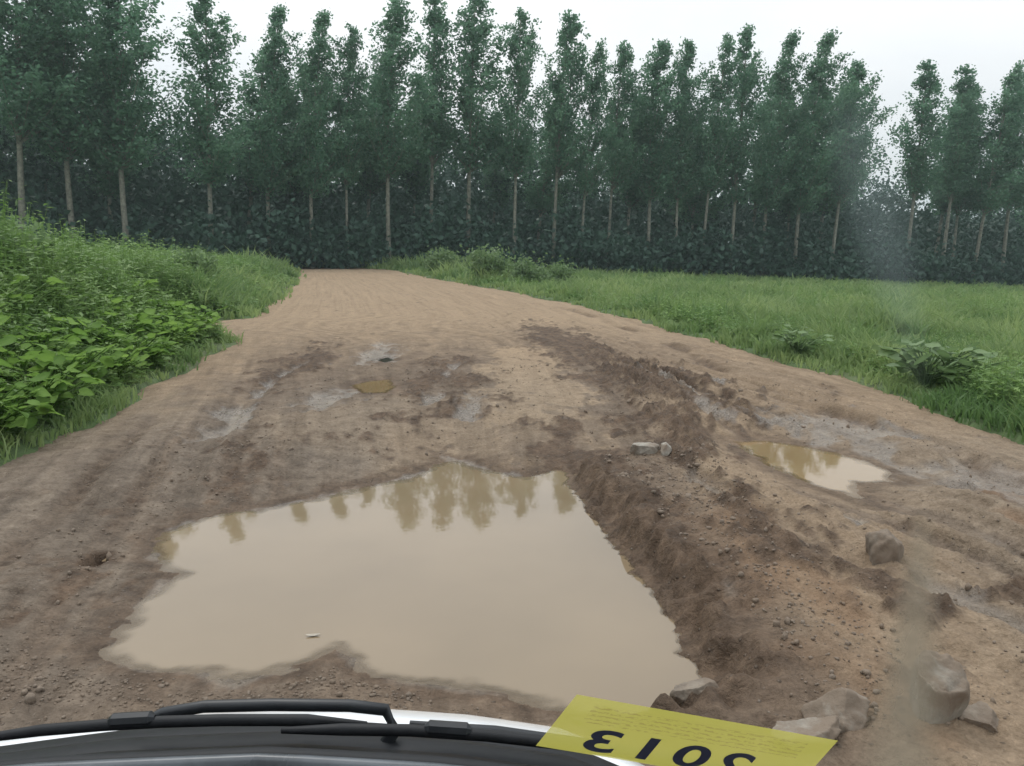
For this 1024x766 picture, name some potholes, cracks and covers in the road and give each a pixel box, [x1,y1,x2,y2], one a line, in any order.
pothole [341,378,404,394]
pothole [716,436,916,510]
pothole [69,453,807,720]
